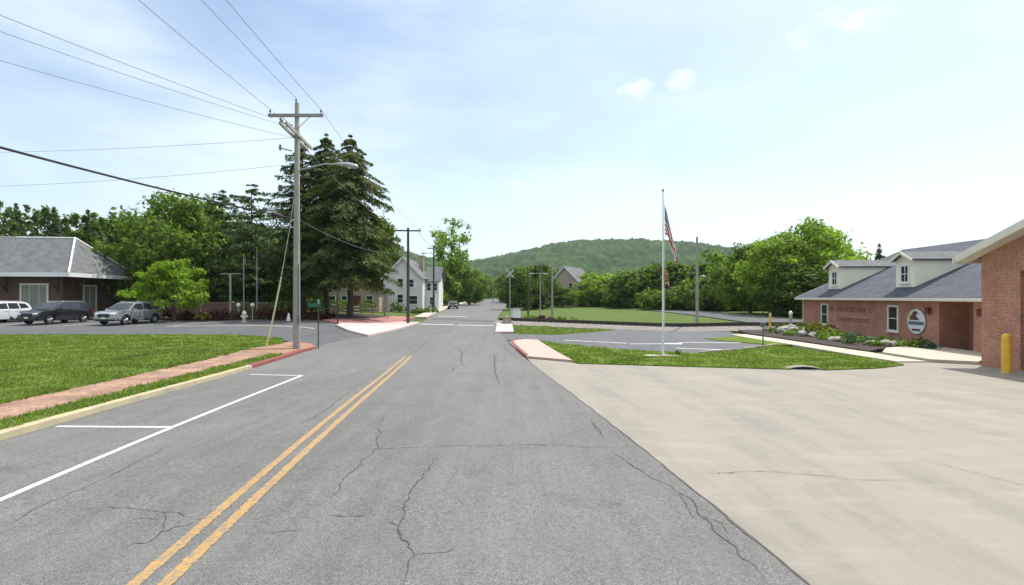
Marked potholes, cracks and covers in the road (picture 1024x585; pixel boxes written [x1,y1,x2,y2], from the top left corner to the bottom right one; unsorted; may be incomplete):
crack [328,417,764,585]
crack [437,345,516,384]
crack [104,506,194,548]
